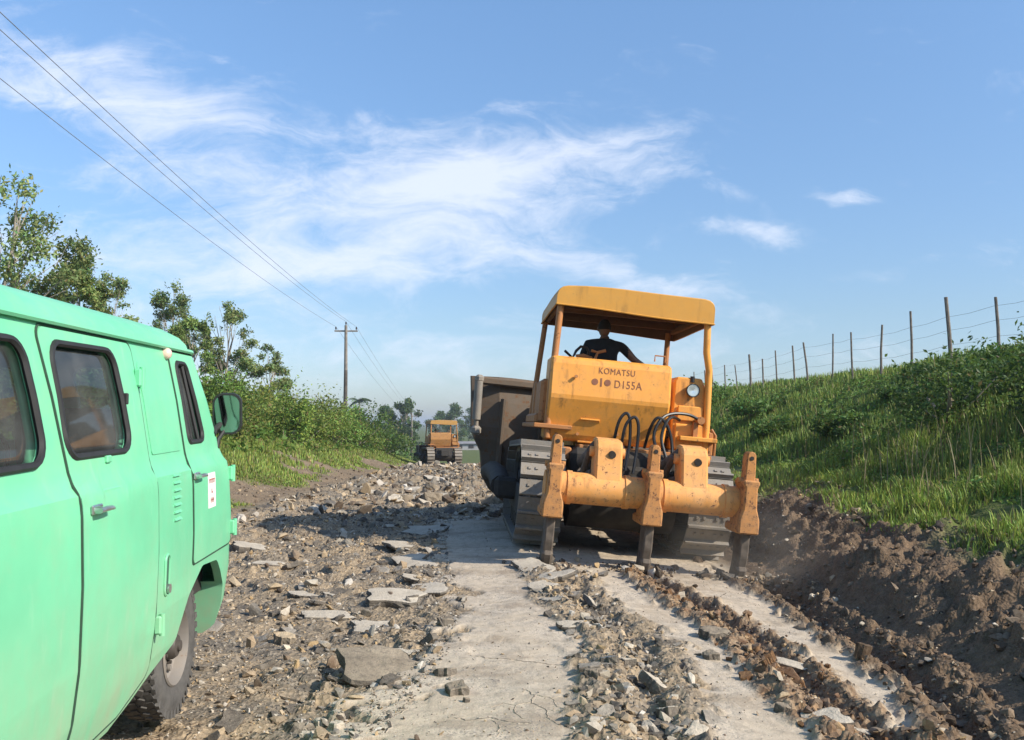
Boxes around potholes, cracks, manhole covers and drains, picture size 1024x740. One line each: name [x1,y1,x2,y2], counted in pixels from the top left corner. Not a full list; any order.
crack [447,688,578,736]
